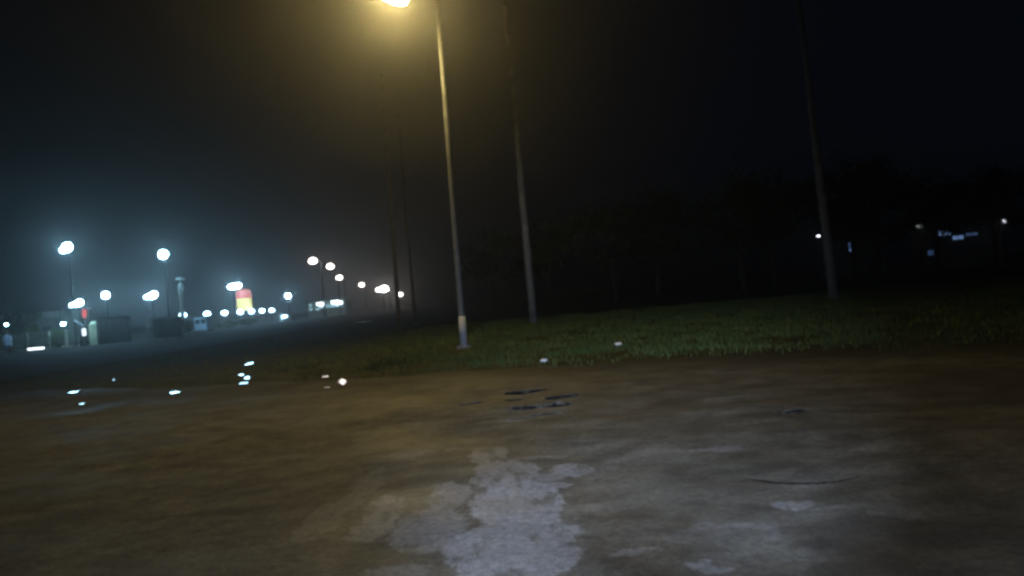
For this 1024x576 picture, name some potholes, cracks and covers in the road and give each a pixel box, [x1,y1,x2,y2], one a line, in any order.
crack [745,476,859,485]
